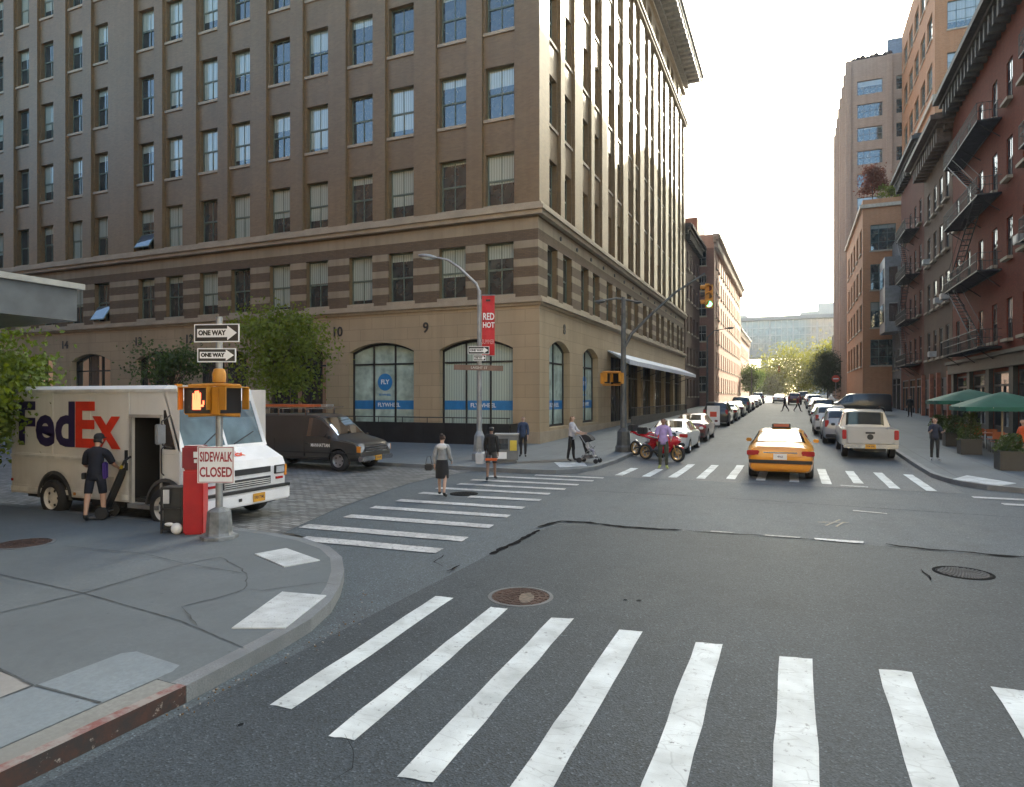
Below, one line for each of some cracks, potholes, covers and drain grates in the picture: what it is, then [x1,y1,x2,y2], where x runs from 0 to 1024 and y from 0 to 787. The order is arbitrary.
manhole cover [932,566,996,580]
manhole cover [0,537,56,550]
crack [489,530,540,554]
crack [181,557,335,625]
manhole cover [488,587,553,607]
